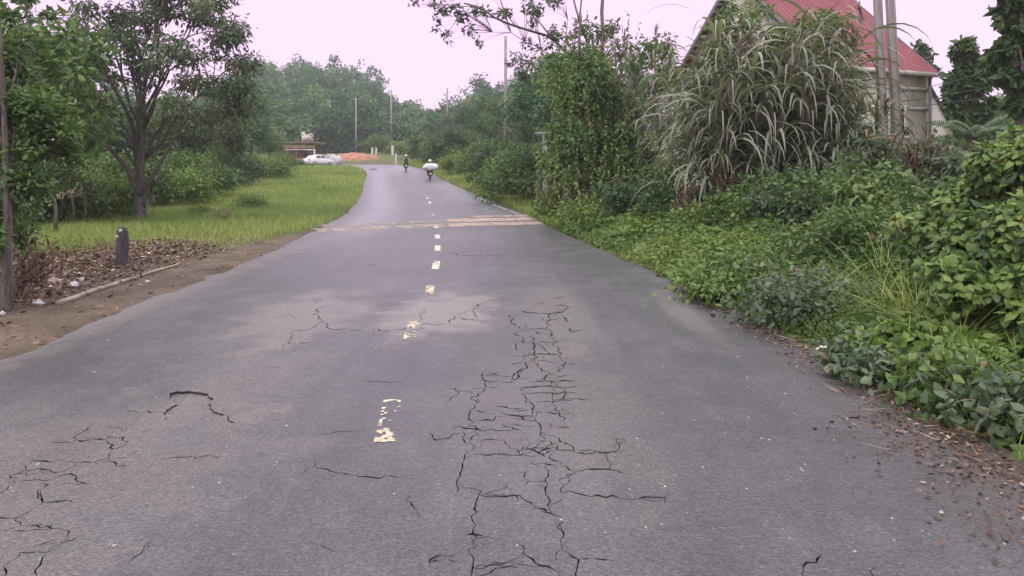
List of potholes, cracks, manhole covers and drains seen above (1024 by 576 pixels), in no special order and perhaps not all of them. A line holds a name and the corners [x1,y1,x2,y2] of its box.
crack [428,296,666,576]
crack [379,300,491,332]
crack [802,554,825,576]
crack [303,461,401,479]
crack [282,299,351,349]
crack [0,426,220,576]
